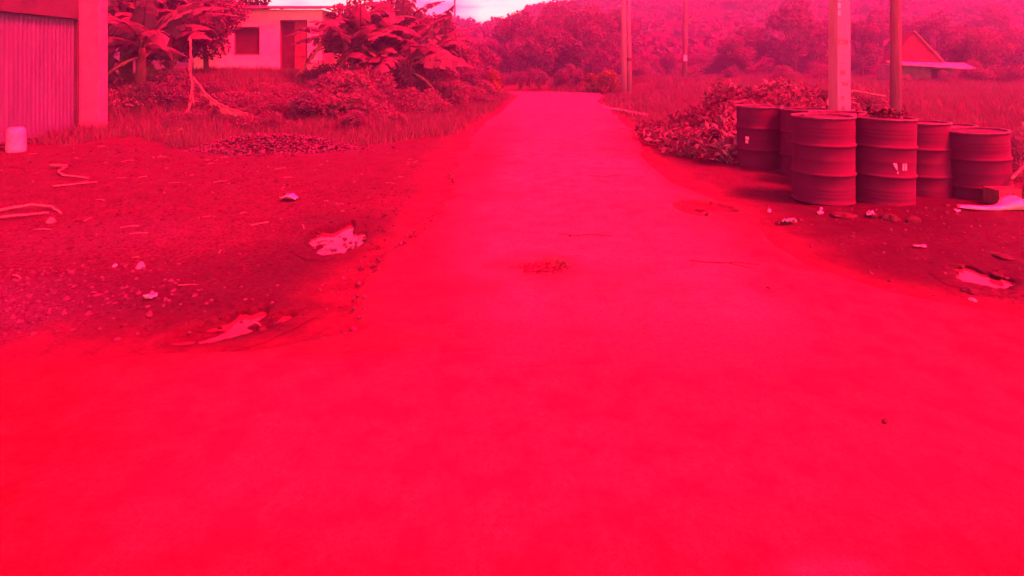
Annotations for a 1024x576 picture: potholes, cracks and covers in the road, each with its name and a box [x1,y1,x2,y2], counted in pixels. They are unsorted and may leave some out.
crack [689,260,759,269]
